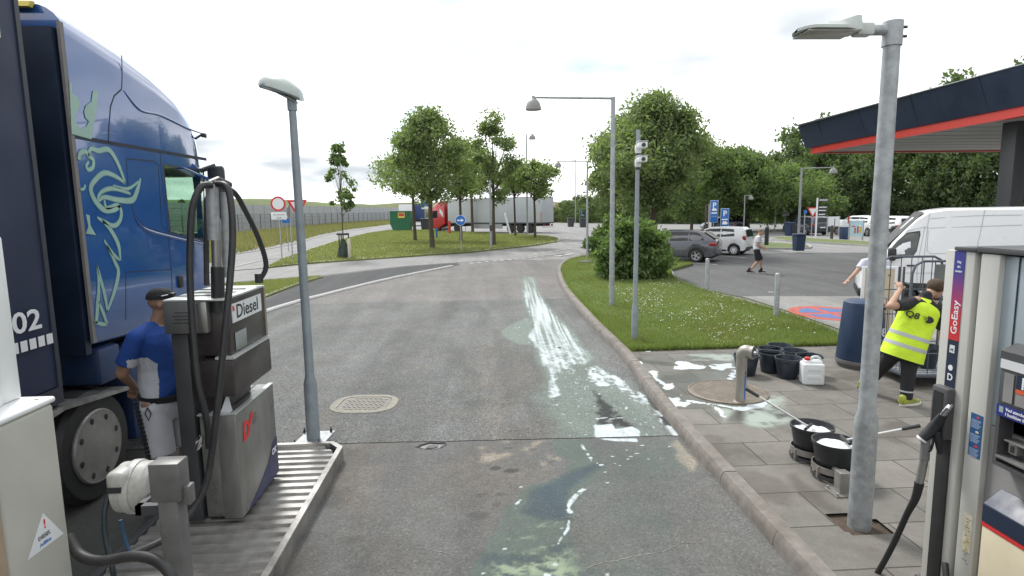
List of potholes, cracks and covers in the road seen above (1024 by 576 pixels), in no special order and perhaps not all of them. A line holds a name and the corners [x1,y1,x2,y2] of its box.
manhole cover [687,380,769,405]
crack [586,542,696,569]
manhole cover [330,395,399,413]
